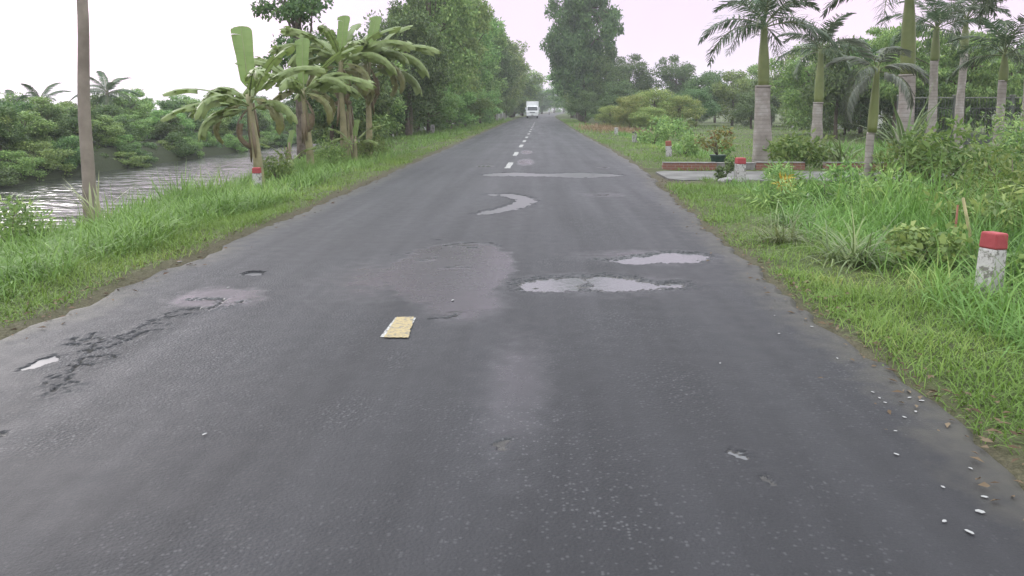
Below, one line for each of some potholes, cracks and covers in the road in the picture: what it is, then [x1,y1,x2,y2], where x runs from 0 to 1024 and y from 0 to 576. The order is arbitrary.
pothole [231,268,278,278]
pothole [576,249,724,268]
pothole [0,349,82,378]
pothole [462,192,547,216]
pothole [494,270,709,297]
crack [25,295,258,403]
